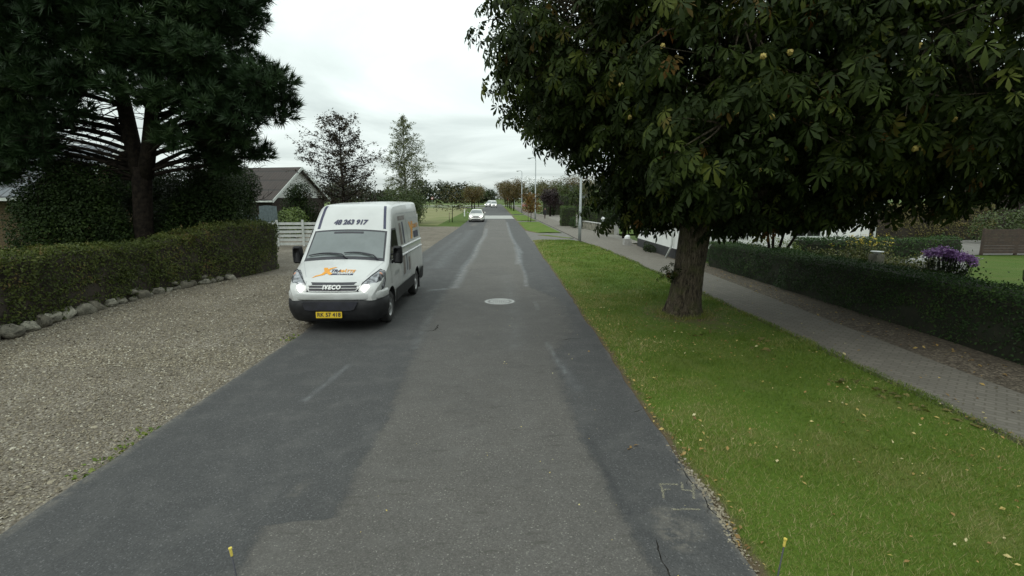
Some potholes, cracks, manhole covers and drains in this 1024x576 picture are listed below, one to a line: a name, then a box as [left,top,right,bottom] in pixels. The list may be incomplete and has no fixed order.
crack [675,461,730,532]
crack [656,540,671,576]
